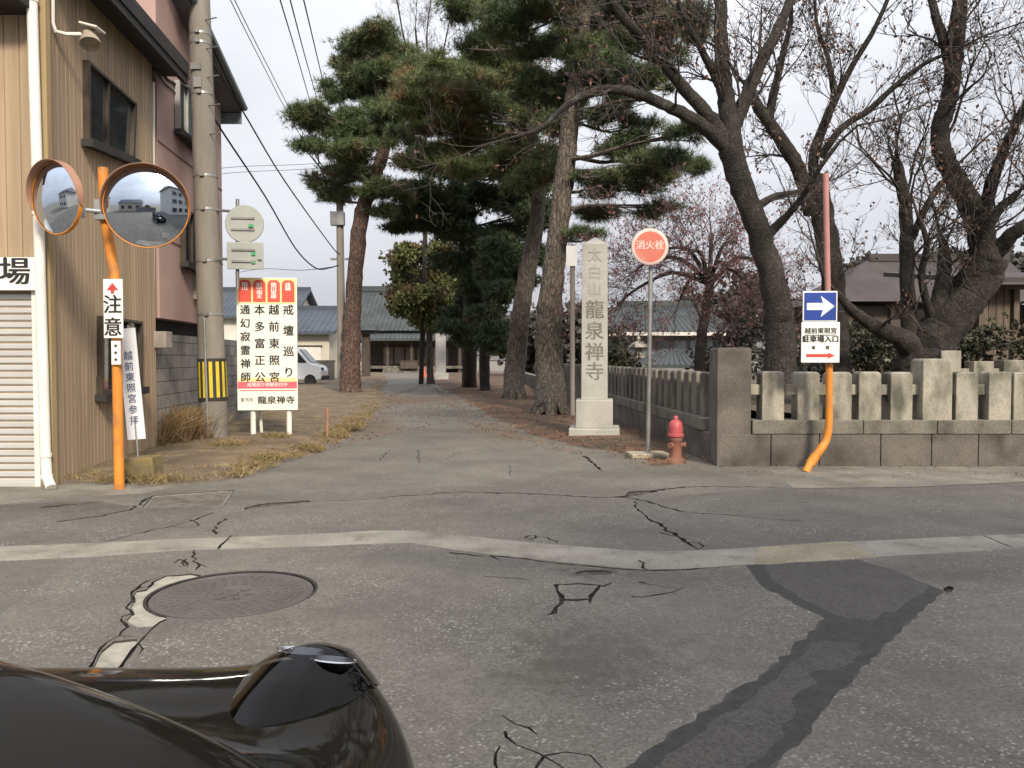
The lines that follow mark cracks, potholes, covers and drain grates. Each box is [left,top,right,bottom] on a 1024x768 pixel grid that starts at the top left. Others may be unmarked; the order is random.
drain grate [143,490,234,507]
crack [493,715,603,768]
crack [88,511,233,668]
crack [450,497,811,615]
manhole cover [143,571,318,619]
